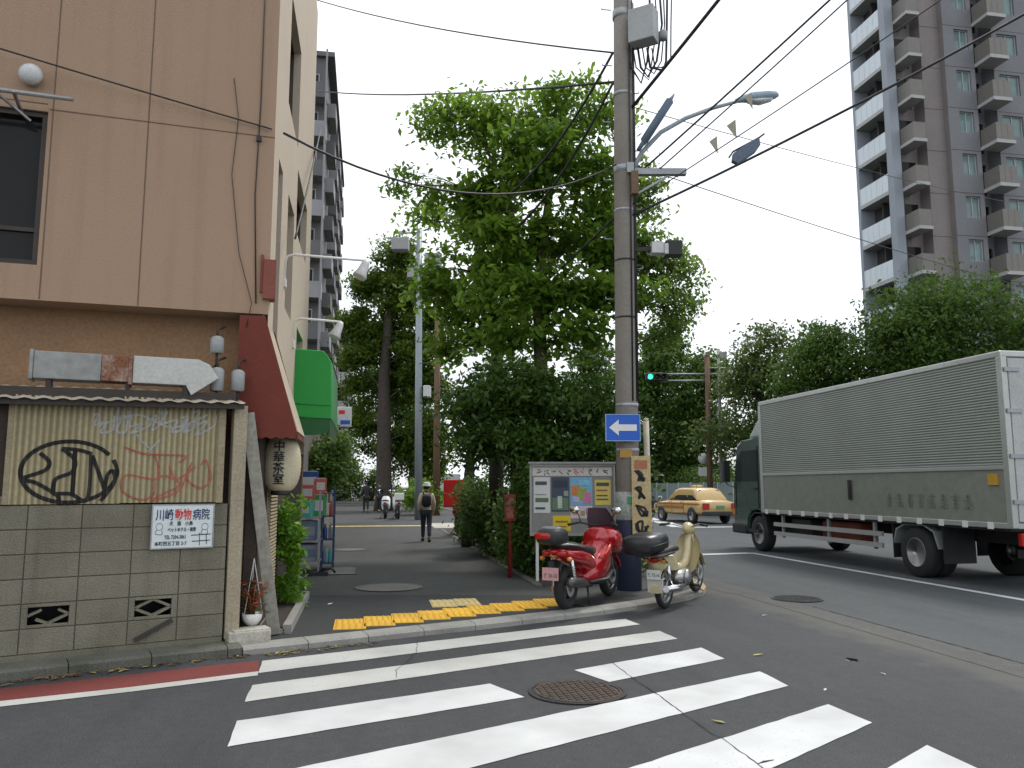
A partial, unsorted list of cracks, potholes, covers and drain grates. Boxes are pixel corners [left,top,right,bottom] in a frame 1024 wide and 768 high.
manhole cover [356,583,423,591]
manhole cover [528,679,627,704]
